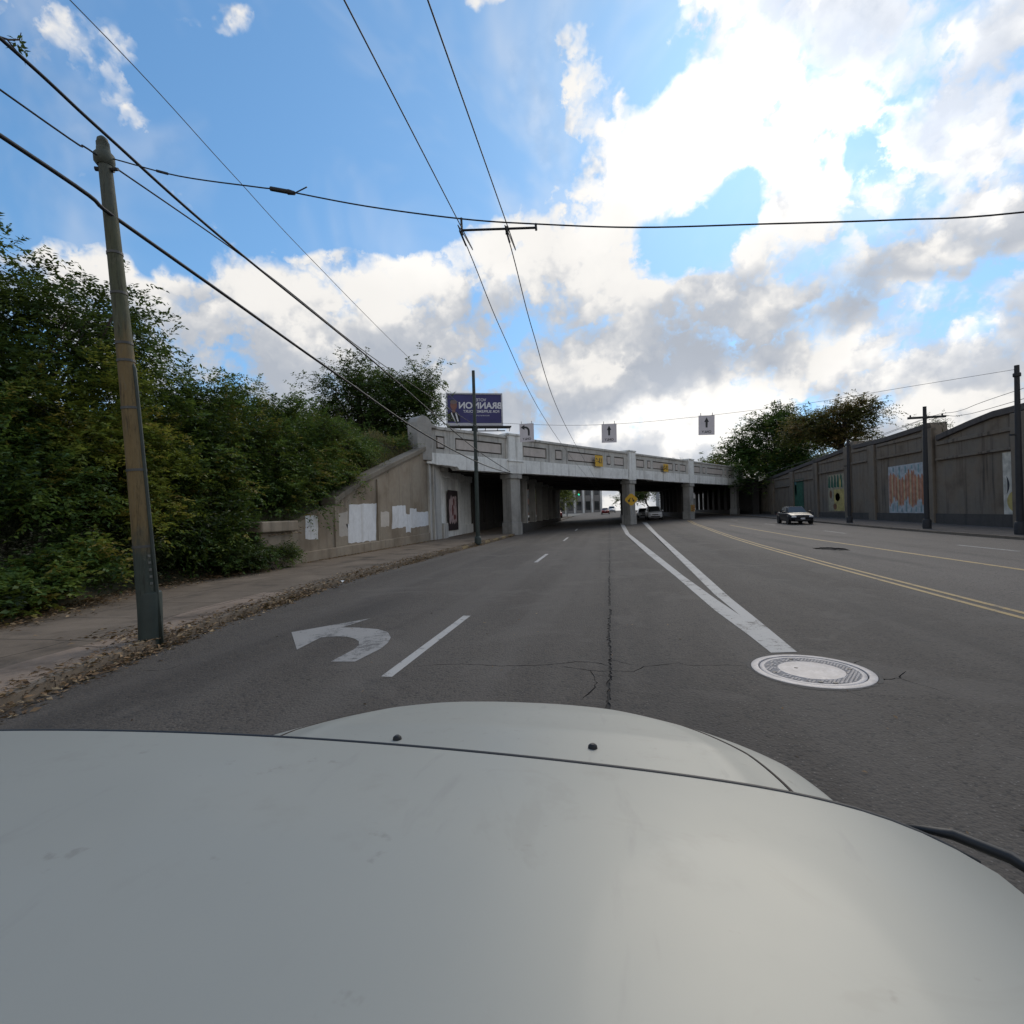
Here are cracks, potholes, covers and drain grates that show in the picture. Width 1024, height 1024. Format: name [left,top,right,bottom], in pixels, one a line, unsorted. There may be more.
manhole cover [746,654,884,691]
